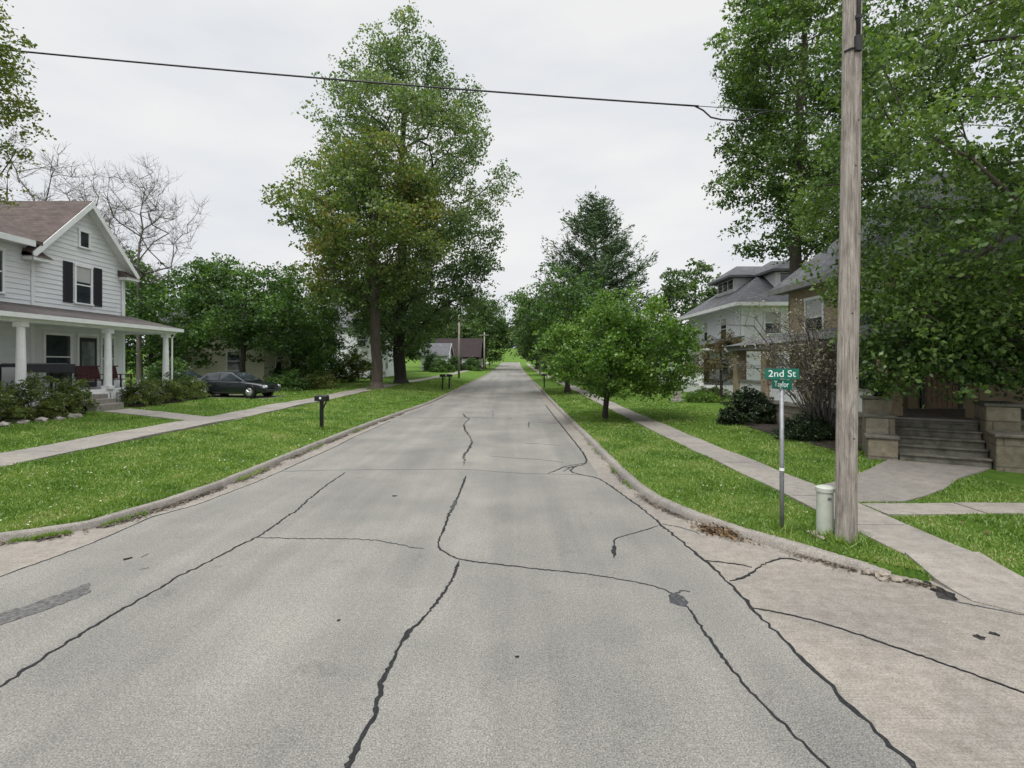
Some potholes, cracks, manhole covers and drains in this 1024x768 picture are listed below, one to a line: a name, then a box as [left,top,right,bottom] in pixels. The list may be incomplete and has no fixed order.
crack [611,524,699,557]
crack [752,607,1024,693]
pothole [924,580,958,601]
crack [462,414,473,464]
crack [0,473,424,687]
crack [707,558,802,581]
